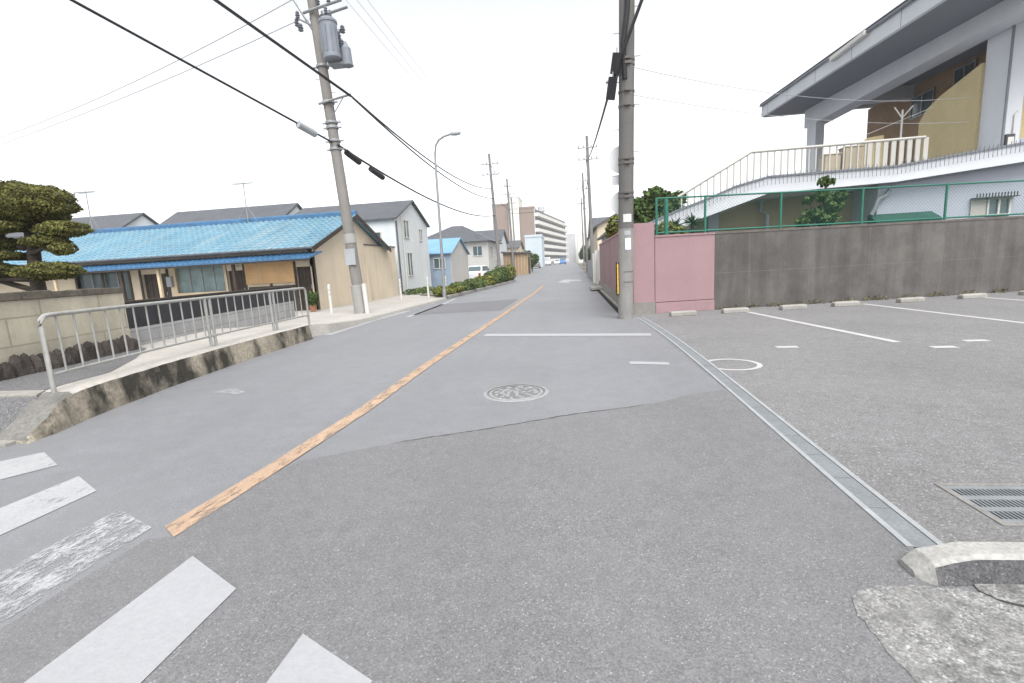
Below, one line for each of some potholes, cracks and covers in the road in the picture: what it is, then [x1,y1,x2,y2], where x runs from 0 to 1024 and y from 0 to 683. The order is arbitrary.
drain grate [934,483,1024,527]
manhole cover [483,384,549,402]
